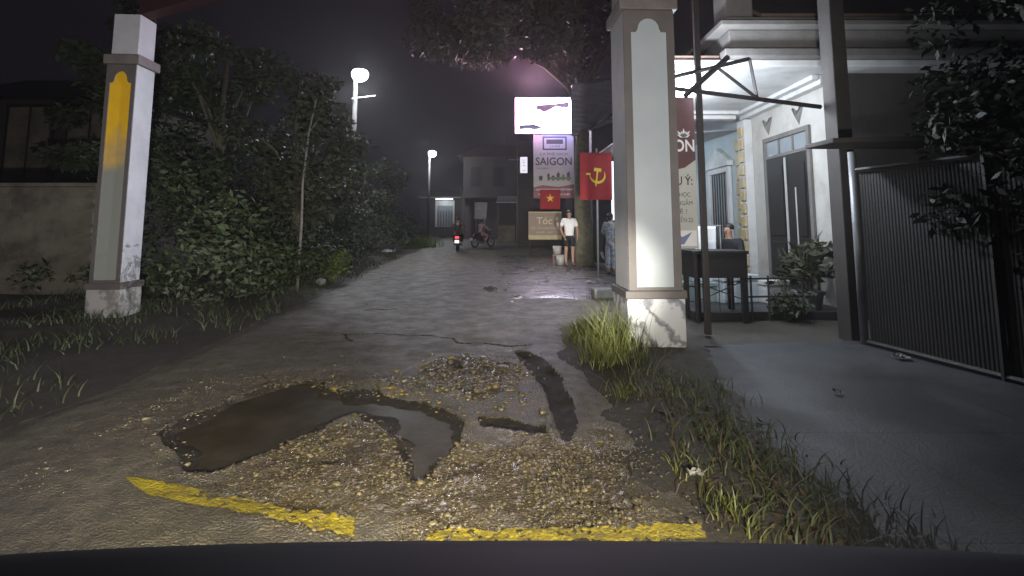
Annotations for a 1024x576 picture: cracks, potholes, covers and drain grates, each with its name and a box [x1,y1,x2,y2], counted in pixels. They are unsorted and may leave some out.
crack [291,332,527,347]
pothole [515,351,579,441]
pothole [478,416,546,434]
pothole [156,380,465,482]
